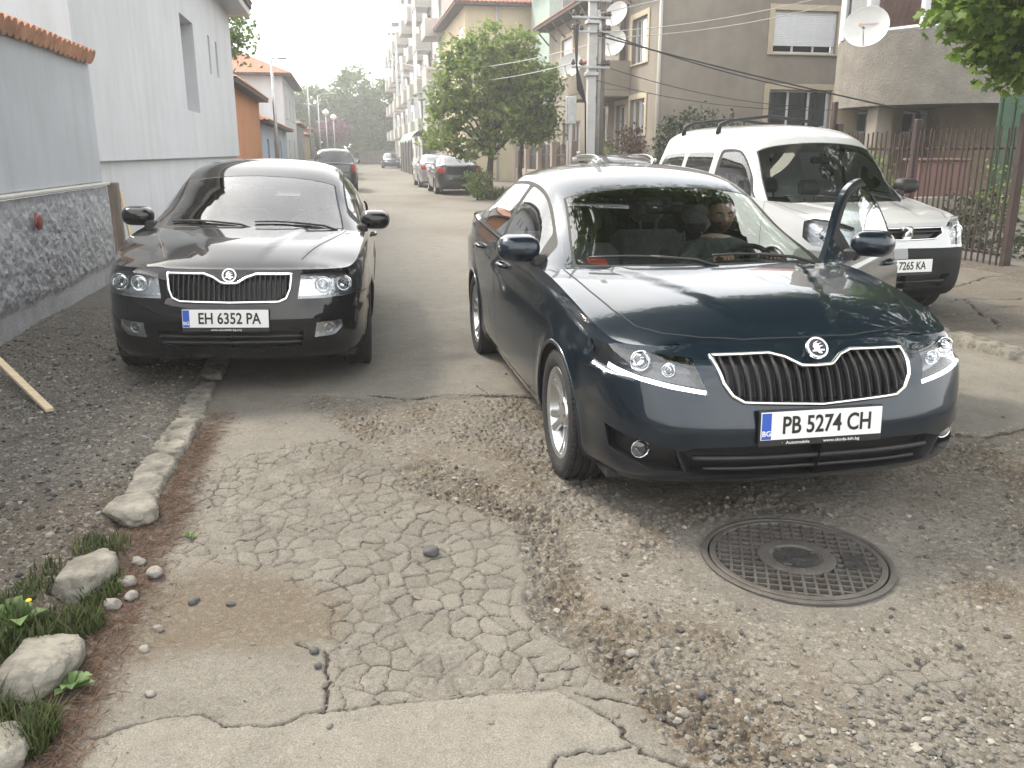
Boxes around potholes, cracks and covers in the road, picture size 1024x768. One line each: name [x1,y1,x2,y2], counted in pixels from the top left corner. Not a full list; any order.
crack [950,428,1024,439]
crack [551,697,688,768]
crack [96,645,484,740]
crack [370,386,536,400]
manhole cover [701,518,897,607]
crack [924,278,1021,329]
crack [157,438,590,712]
